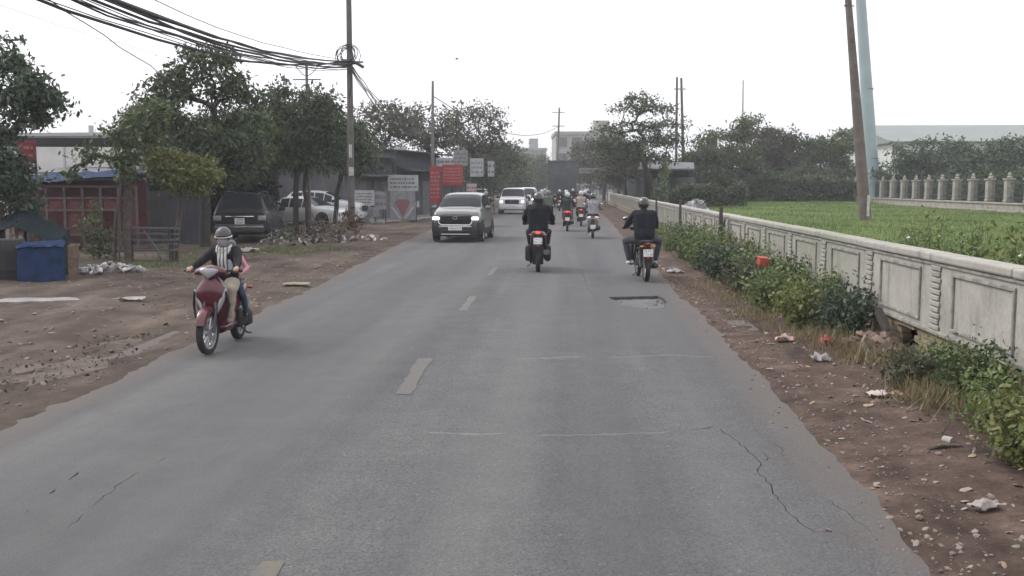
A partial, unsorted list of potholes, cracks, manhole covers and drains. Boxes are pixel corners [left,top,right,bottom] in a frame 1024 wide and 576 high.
pothole [609,296,667,309]
crack [425,427,869,540]
